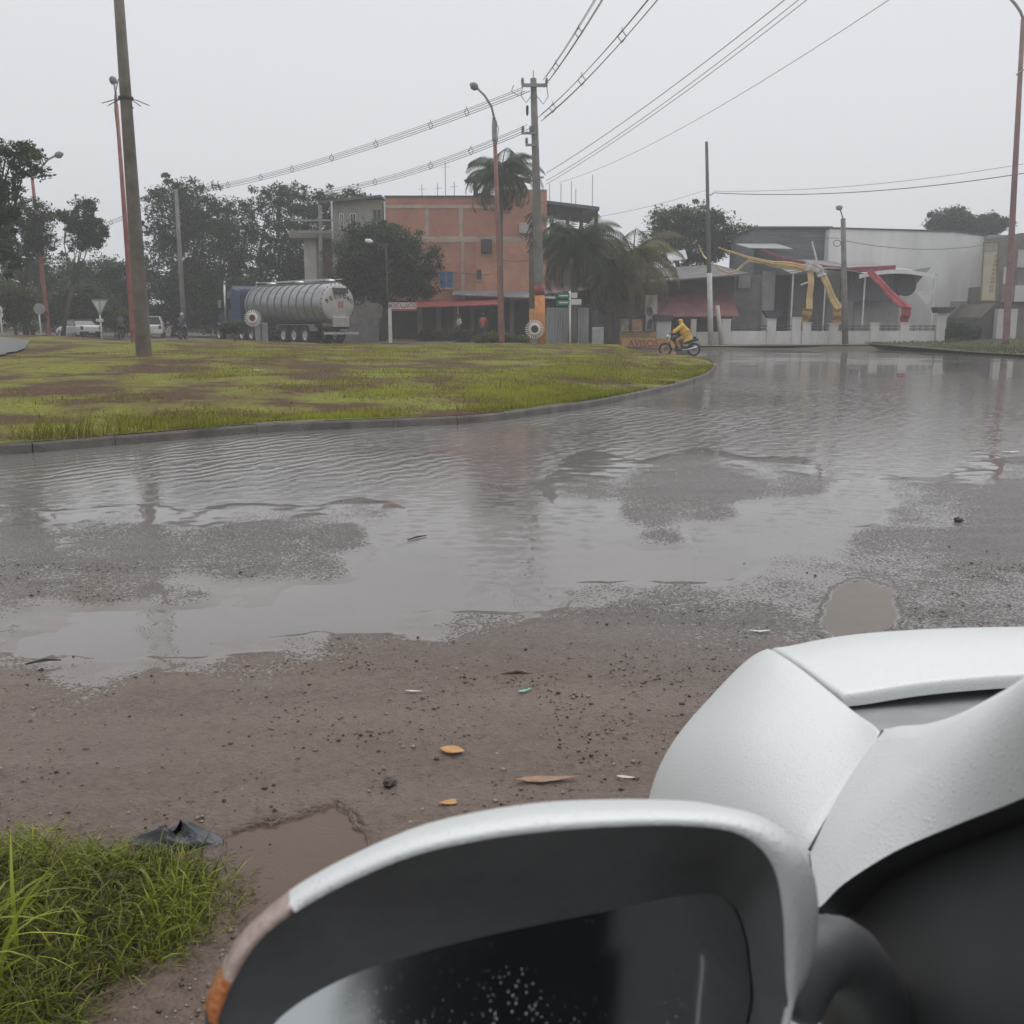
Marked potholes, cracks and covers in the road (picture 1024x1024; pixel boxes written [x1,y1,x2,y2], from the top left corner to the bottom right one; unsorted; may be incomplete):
pothole [221,802,371,934]
pothole [815,577,904,639]
